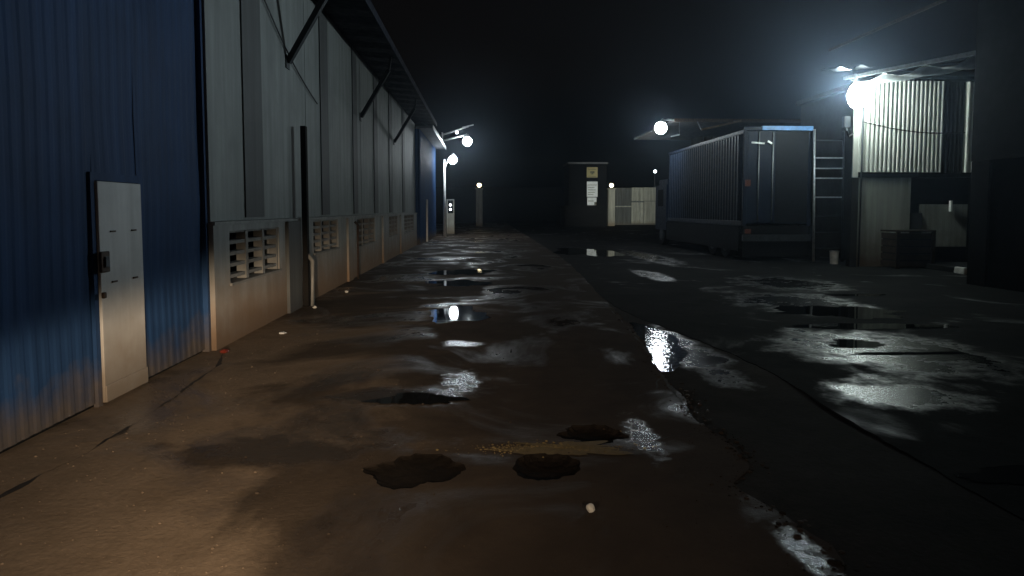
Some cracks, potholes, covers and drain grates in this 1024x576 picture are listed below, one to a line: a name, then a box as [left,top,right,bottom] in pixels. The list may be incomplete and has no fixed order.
pothole [512,452,580,481]
pothole [557,424,629,445]
pothole [361,453,466,490]
